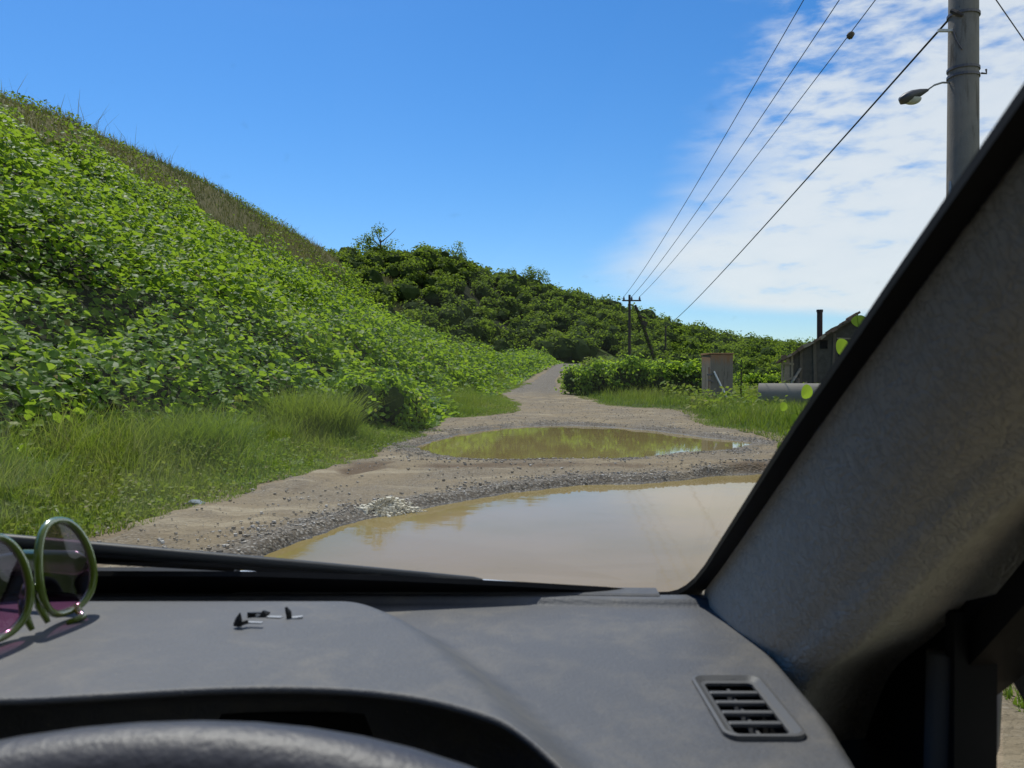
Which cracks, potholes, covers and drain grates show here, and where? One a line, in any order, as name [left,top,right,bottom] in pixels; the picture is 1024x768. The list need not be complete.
pothole [398,421,773,460]
pothole [219,461,769,592]
